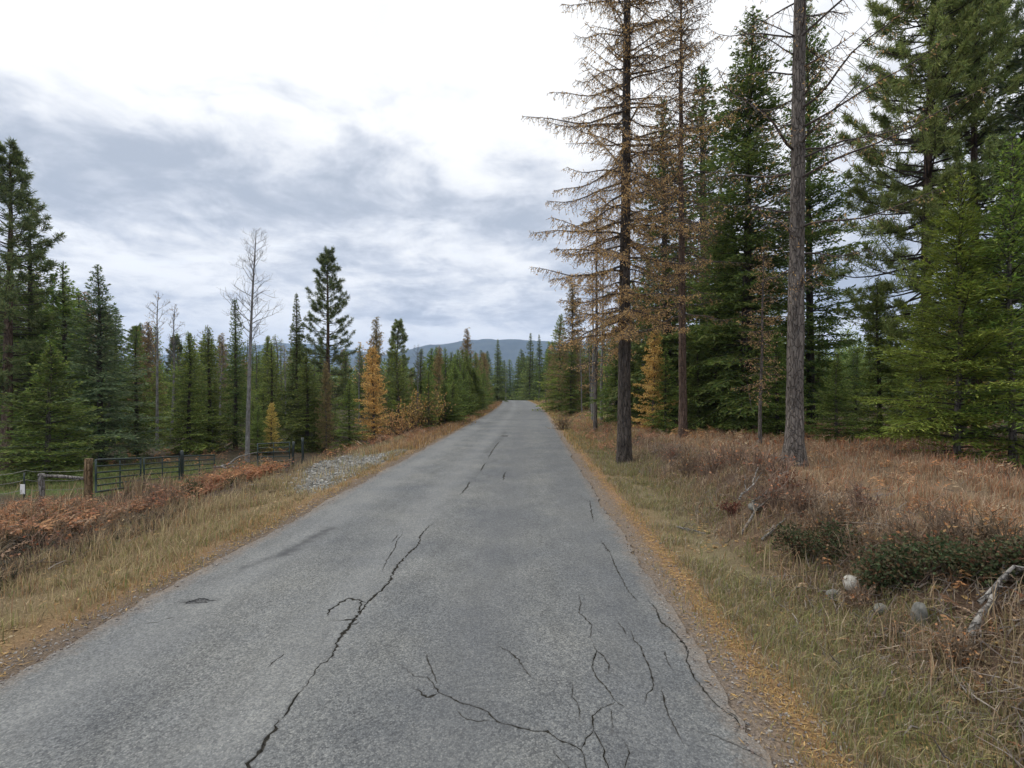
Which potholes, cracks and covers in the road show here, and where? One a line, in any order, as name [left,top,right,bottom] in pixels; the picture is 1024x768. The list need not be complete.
crack [245,526,429,768]
crack [619,605,762,758]
crack [407,601,630,768]
